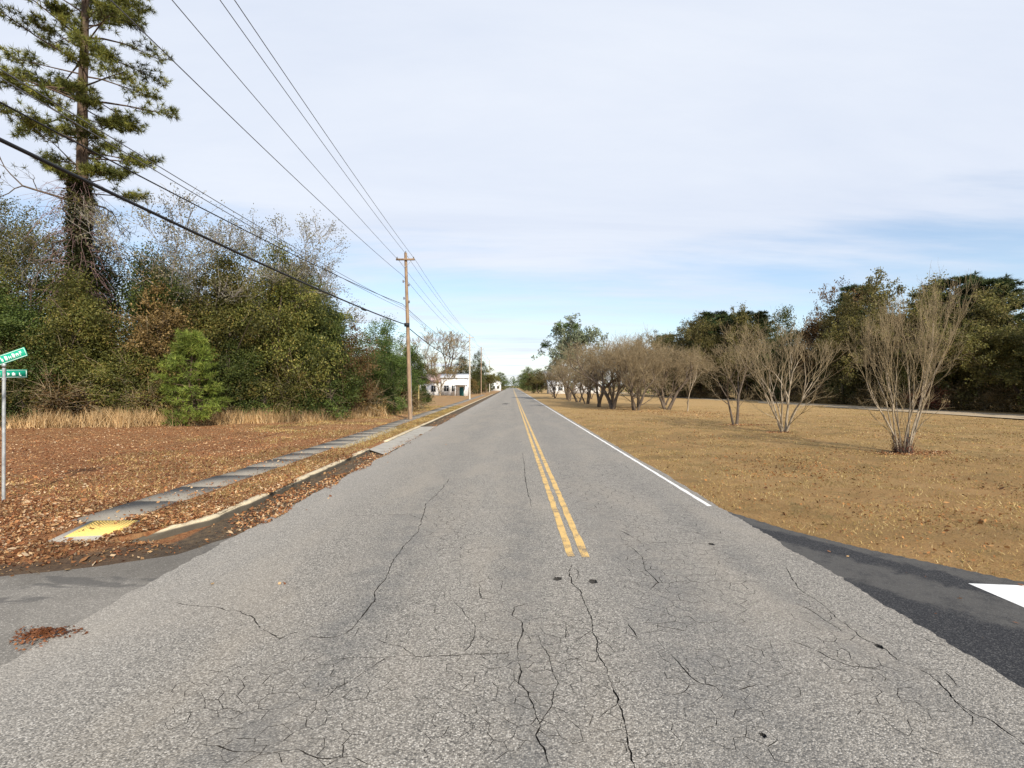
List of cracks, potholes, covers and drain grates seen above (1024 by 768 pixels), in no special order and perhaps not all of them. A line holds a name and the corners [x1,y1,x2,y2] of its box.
crack [165,478,650,768]
crack [786,567,1024,755]
crack [650,641,801,763]
crack [612,505,758,640]
